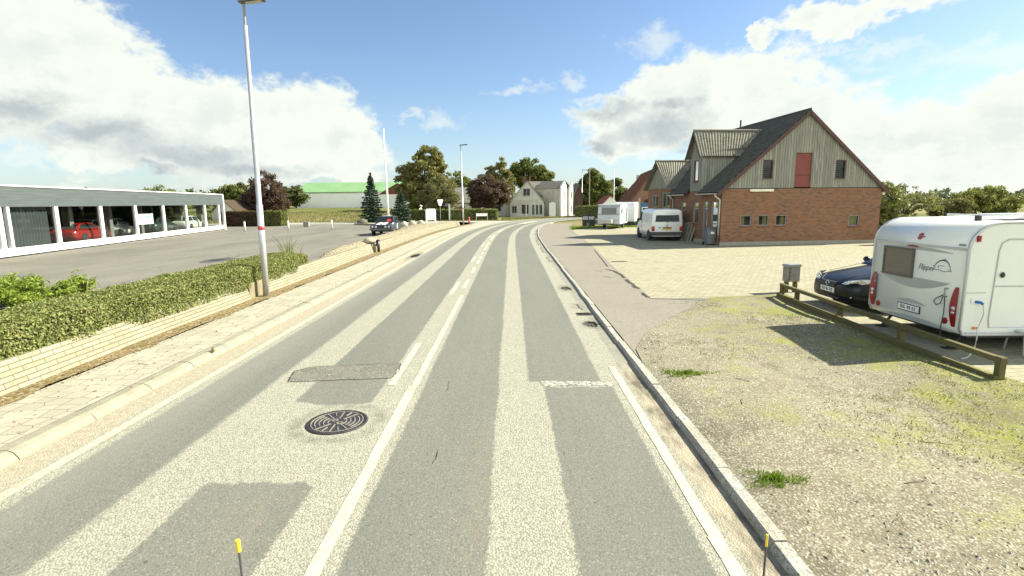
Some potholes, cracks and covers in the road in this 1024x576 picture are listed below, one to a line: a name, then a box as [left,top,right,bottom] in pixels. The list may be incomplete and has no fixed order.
manhole cover [306,410,368,435]
